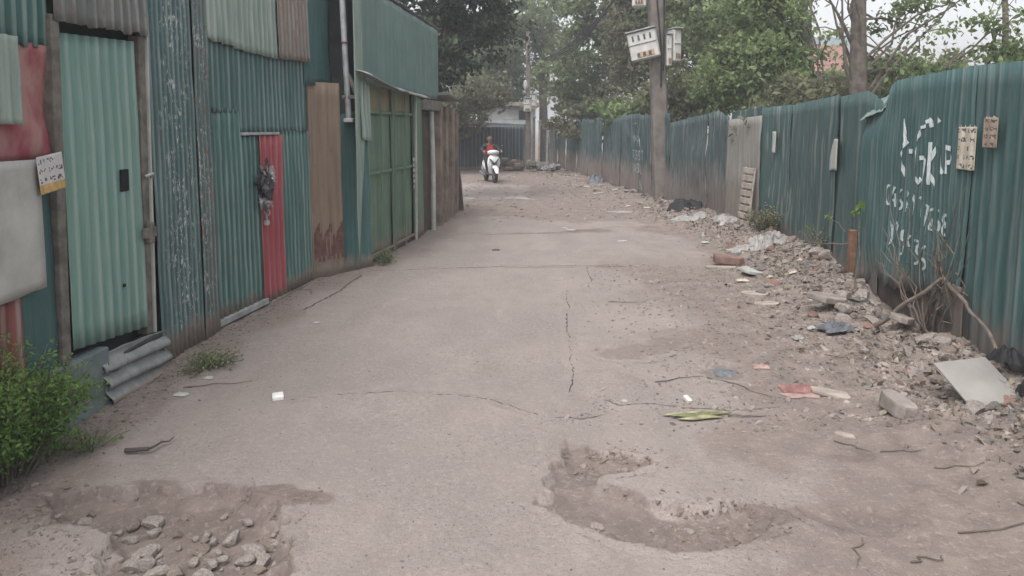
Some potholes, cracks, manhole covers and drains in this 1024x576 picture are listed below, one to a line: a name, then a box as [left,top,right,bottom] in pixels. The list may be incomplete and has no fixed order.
pothole [21,476,313,576]
pothole [582,326,706,363]
crack [280,264,781,426]
pothole [515,432,789,564]
